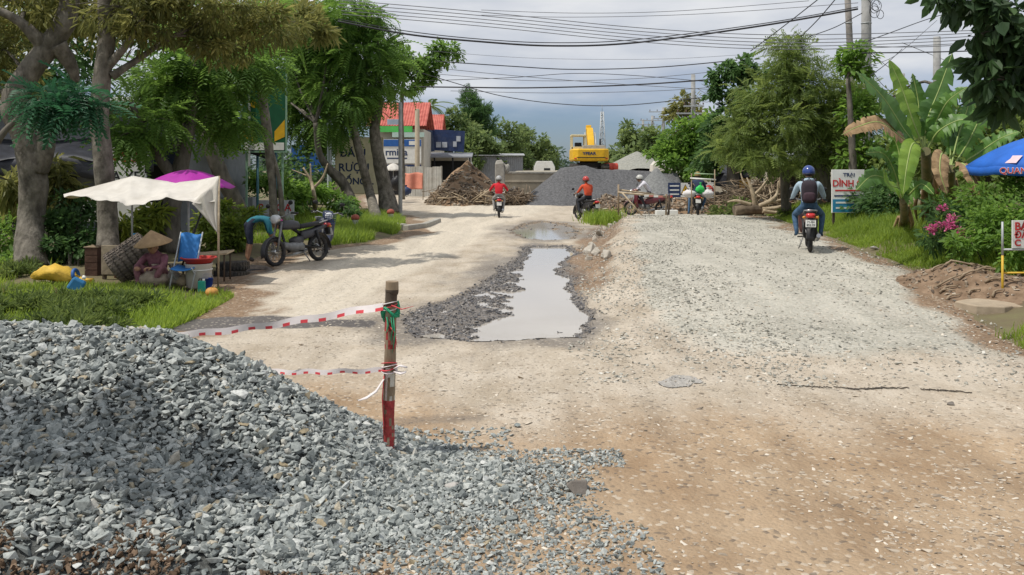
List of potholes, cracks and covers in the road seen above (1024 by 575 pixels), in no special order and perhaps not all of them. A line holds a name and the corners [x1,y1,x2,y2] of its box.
pothole [401,244,600,343]
crack [777,384,972,393]
pothole [506,221,587,240]
